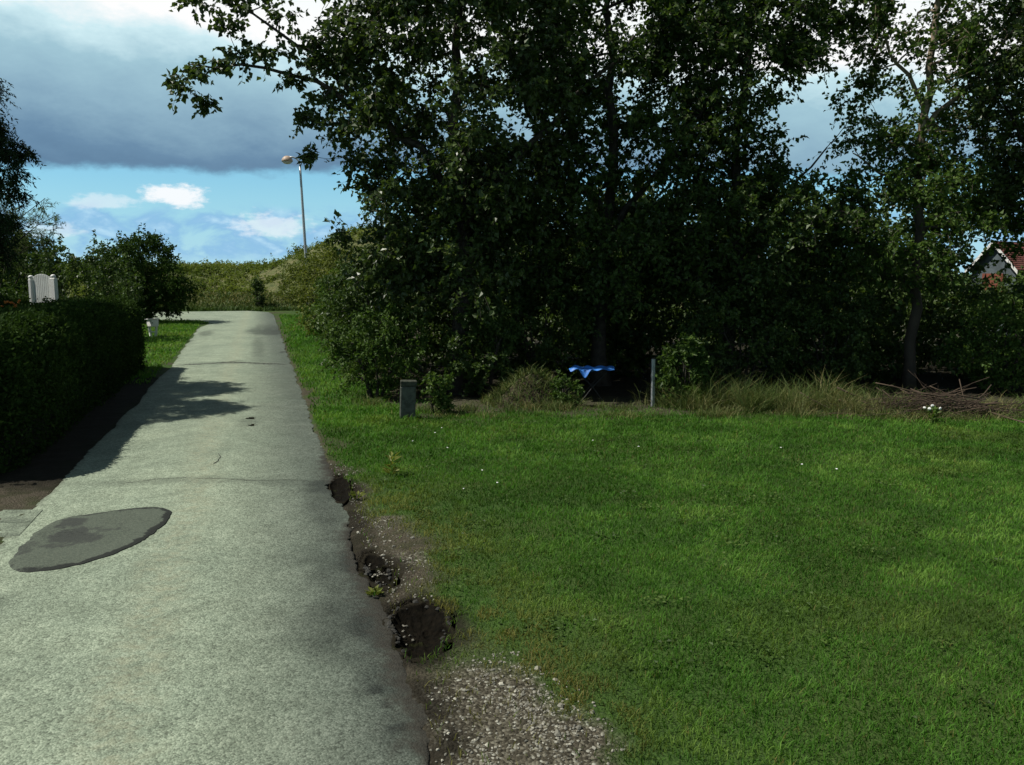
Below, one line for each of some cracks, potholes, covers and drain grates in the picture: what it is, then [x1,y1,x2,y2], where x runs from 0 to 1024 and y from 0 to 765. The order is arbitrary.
pothole [329,477,351,504]
pothole [382,599,455,663]
pothole [358,553,398,591]
